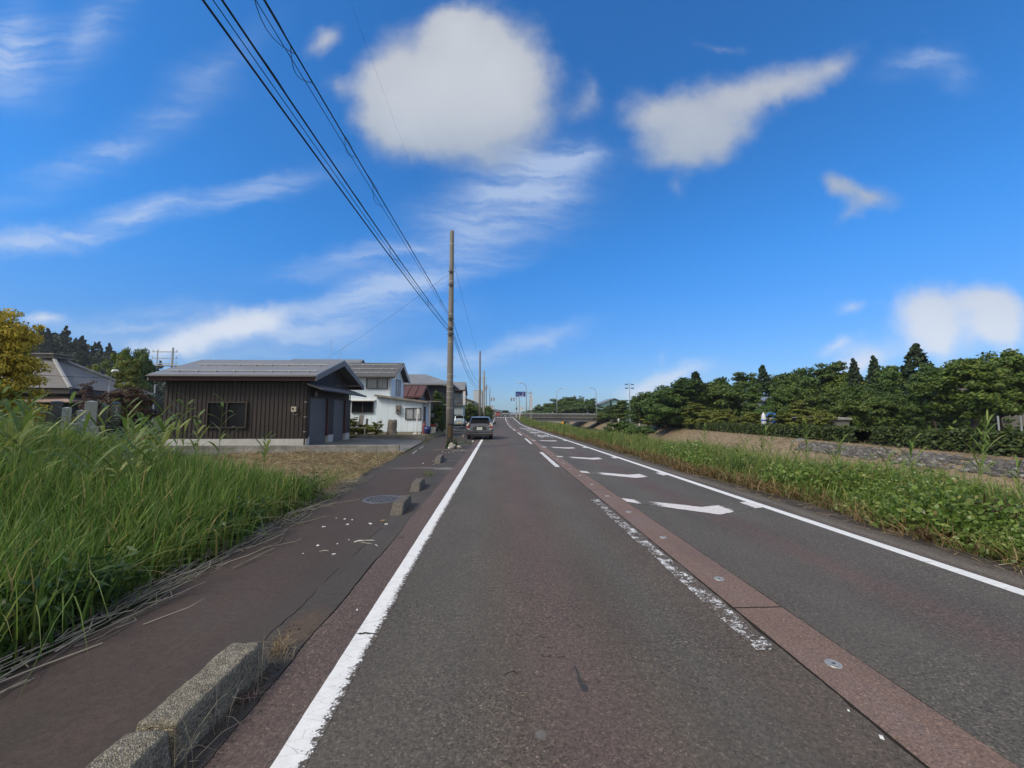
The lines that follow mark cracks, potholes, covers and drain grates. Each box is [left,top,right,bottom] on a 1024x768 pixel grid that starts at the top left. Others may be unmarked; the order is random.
crack [503,617,583,694]
manhole cover [362,495,400,504]
